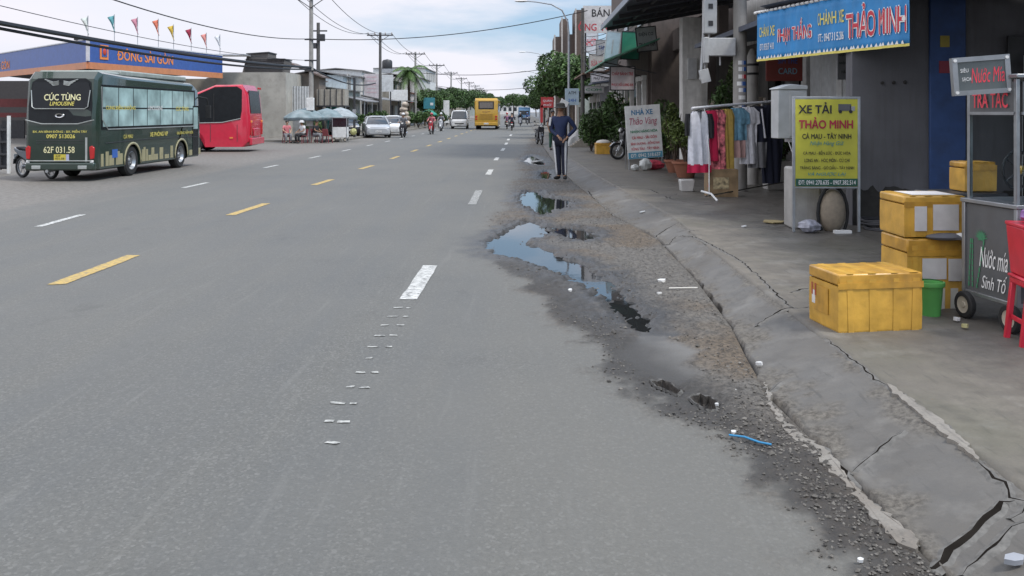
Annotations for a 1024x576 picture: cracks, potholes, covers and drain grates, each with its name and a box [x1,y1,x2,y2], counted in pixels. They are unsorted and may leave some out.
pothole [687,393,719,412]
pothole [649,378,684,397]
